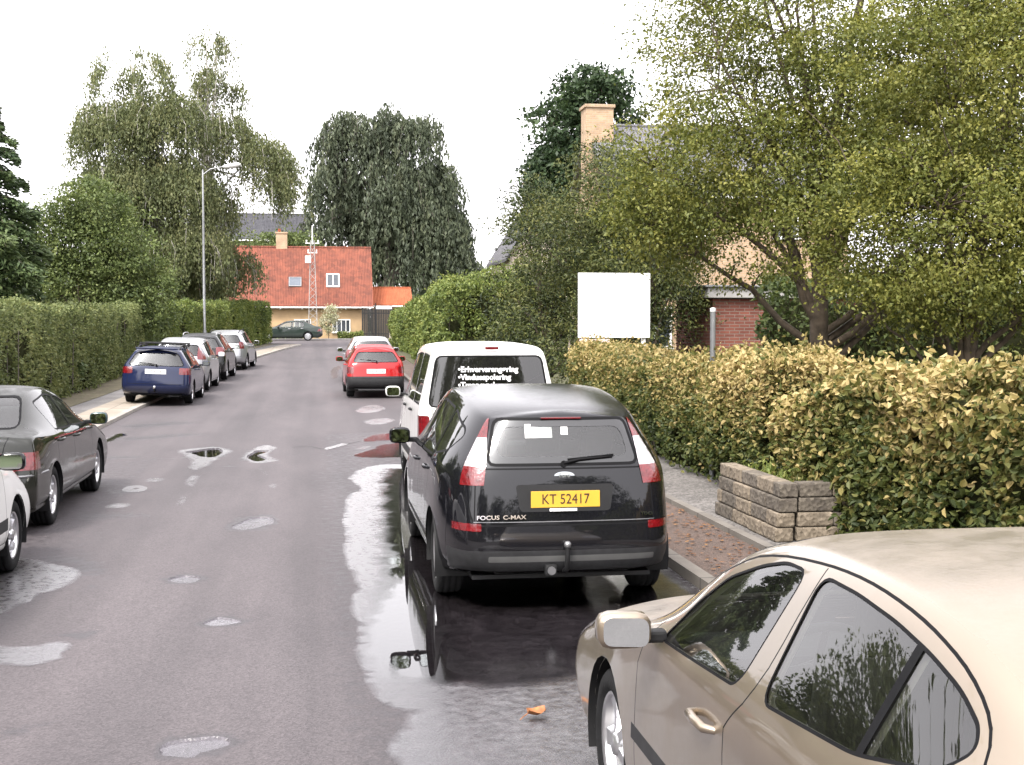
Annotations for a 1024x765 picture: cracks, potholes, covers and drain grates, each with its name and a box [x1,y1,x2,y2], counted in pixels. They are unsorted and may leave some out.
pothole [247,450,269,462]
pothole [187,448,223,458]
